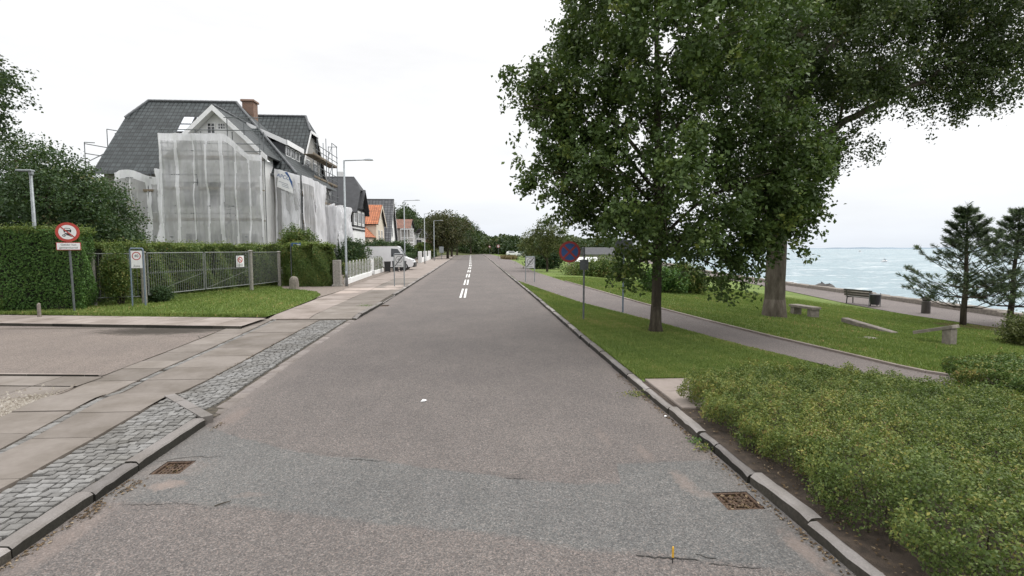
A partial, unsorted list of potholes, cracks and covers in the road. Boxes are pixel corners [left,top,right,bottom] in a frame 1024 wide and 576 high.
crack [636,554,751,568]
